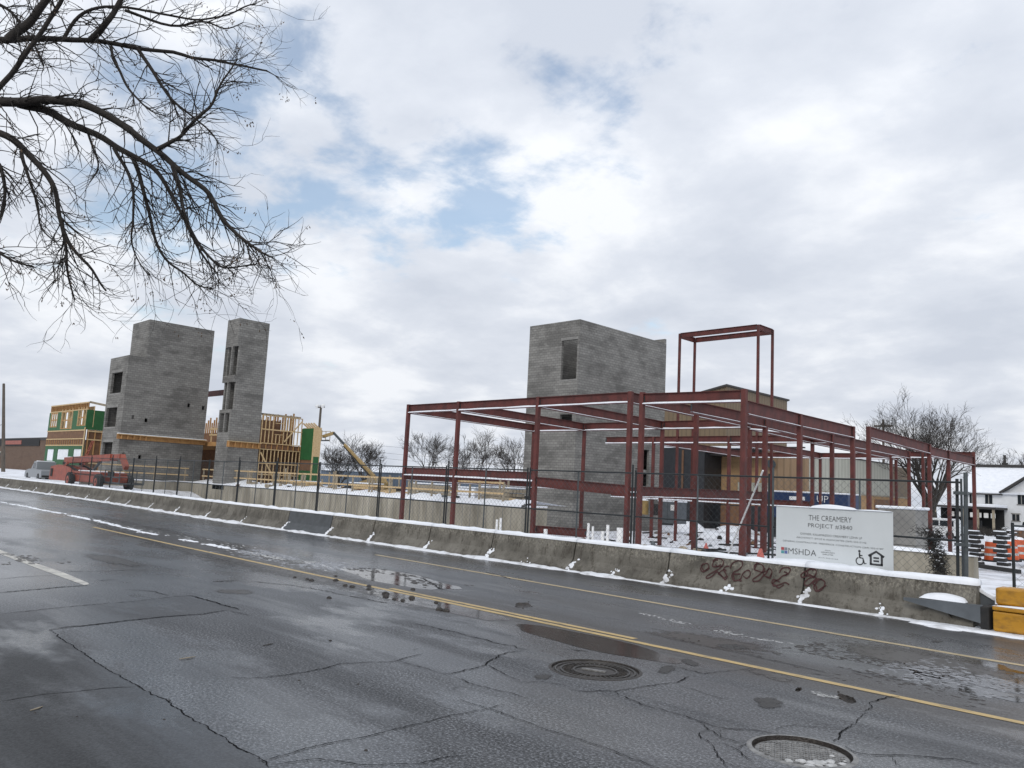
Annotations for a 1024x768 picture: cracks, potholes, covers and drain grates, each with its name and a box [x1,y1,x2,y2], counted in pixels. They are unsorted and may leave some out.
pothole [837,691,856,703]
manhole cover [747,734,859,768]
manhole cover [548,659,643,681]
crack [231,623,988,767]
